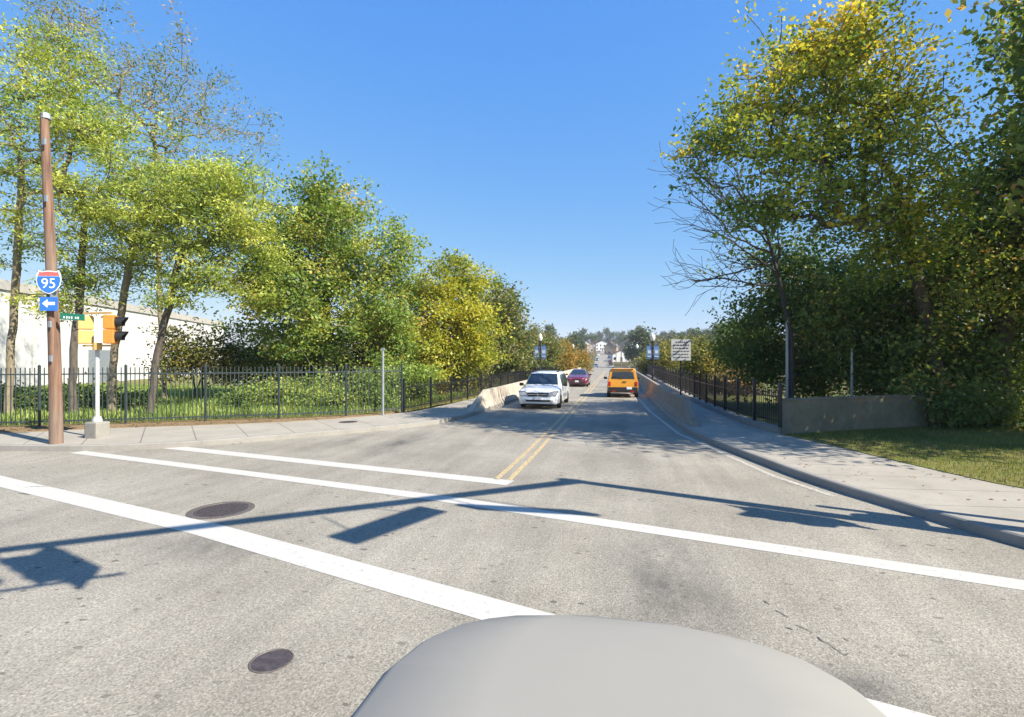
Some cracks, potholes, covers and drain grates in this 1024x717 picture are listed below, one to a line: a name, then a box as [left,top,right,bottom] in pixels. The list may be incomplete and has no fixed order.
manhole cover [248,648,294,674]
manhole cover [185,501,255,520]
